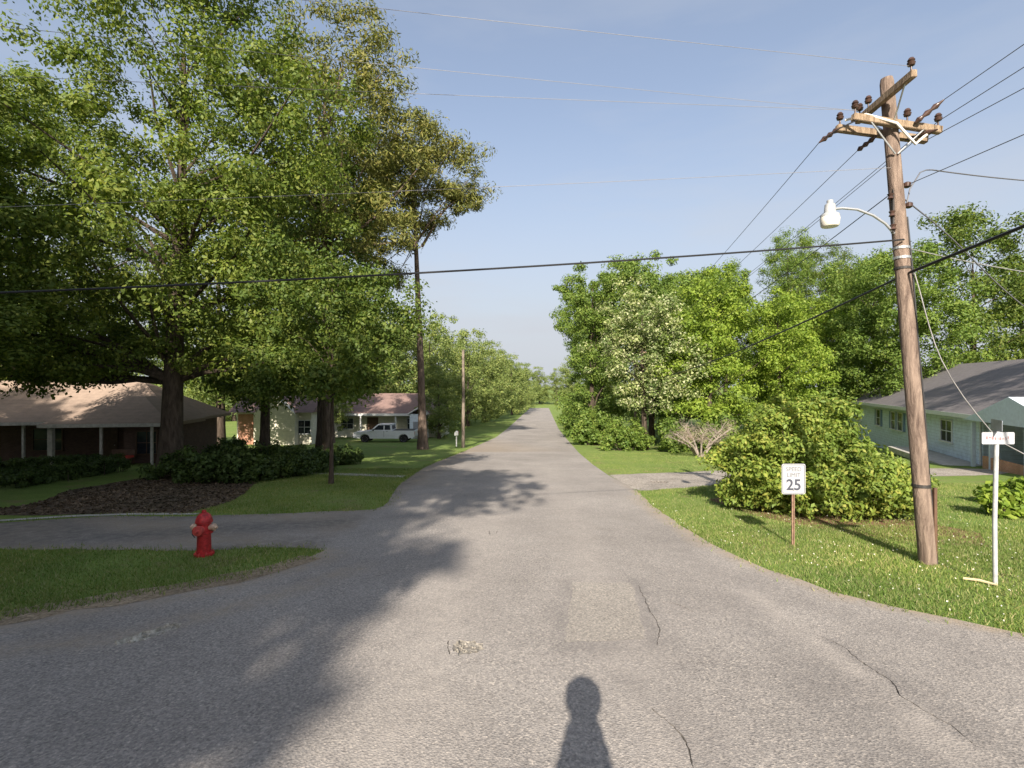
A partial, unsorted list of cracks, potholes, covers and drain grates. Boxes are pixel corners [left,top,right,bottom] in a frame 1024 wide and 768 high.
pothole [115,623,181,645]
pothole [452,640,485,656]
crack [651,708,693,766]
crack [638,585,693,644]
